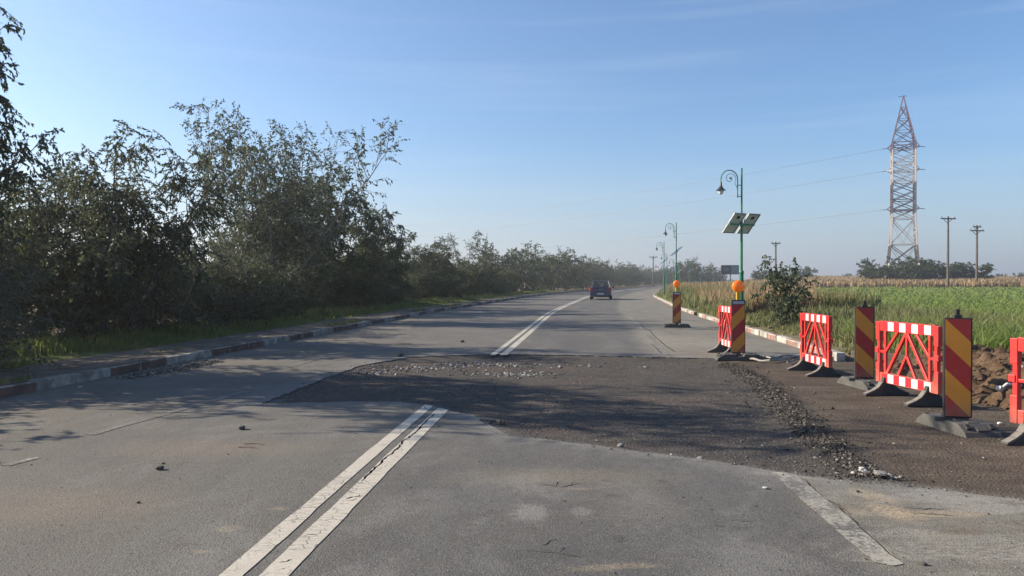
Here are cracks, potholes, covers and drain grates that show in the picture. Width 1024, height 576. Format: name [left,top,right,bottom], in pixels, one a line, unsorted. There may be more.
crack [347,415,434,499]
